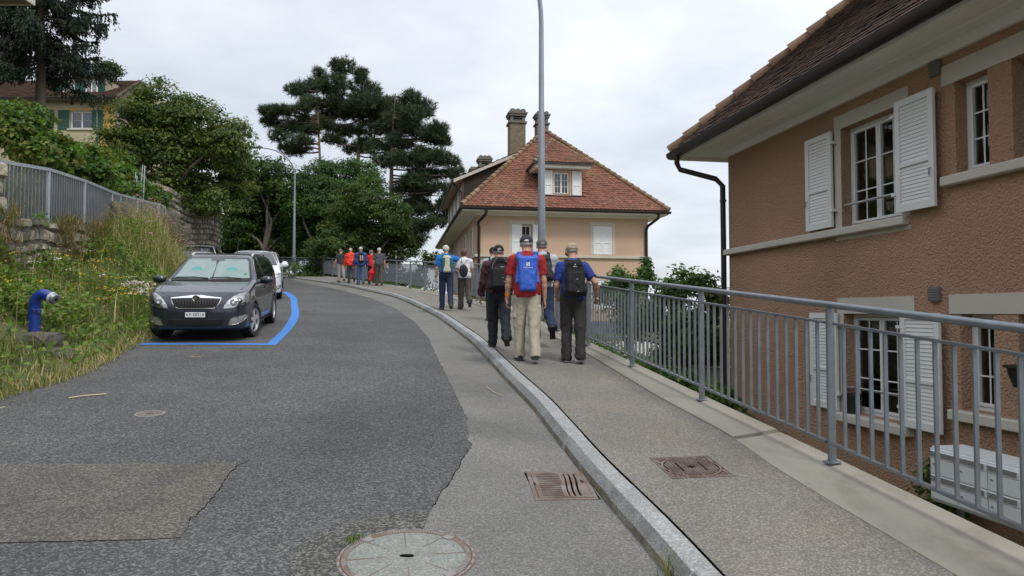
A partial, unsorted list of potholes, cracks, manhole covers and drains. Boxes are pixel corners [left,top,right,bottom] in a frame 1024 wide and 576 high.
manhole cover [336,529,475,576]
manhole cover [650,456,736,479]
crack [188,461,248,524]
drain grate [526,472,599,501]
